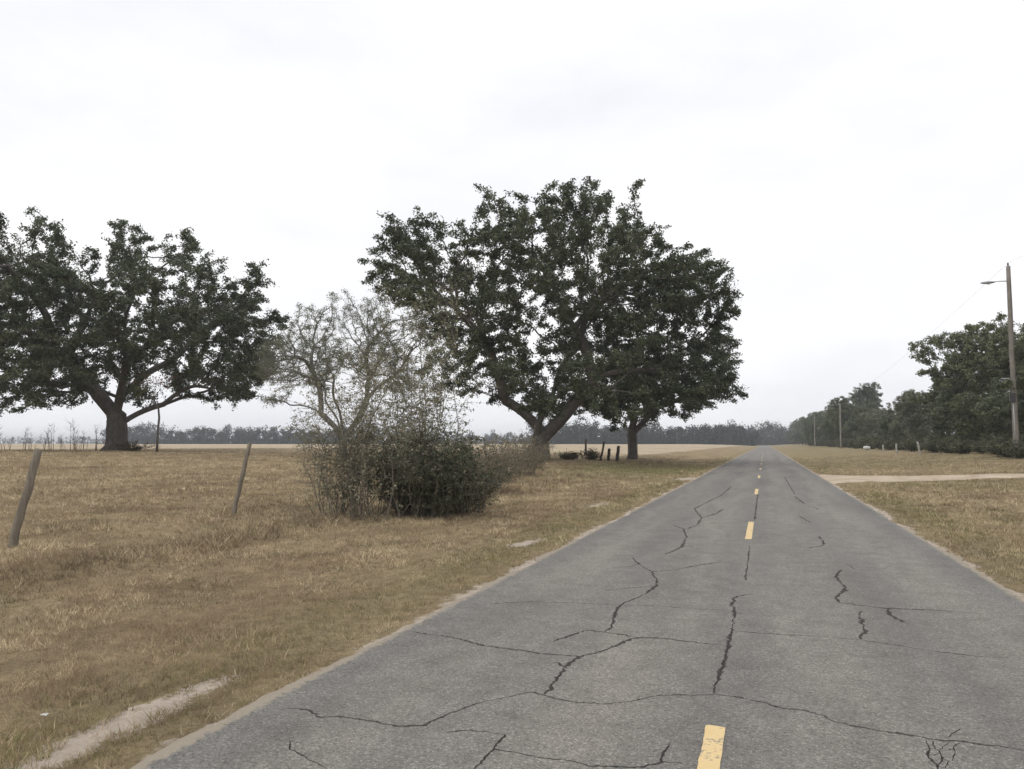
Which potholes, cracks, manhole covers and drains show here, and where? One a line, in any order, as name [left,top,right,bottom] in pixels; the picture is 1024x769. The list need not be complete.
crack [286,478,1024,769]
